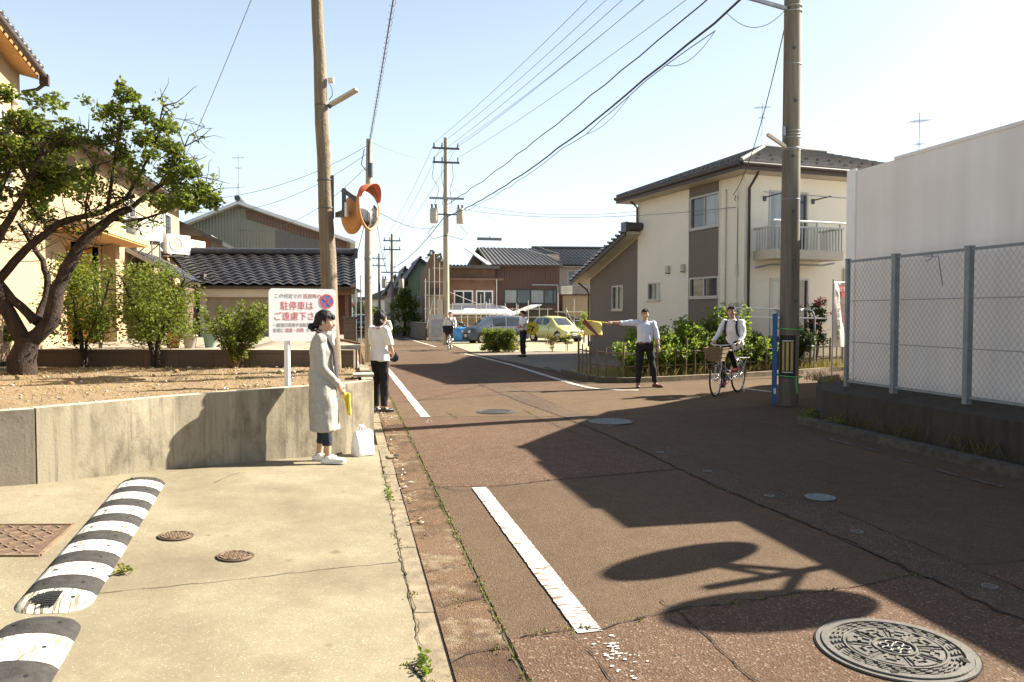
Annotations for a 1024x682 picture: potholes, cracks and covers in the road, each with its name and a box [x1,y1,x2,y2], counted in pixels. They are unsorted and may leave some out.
manhole cover [157,531,194,541]
manhole cover [814,618,983,682]
manhole cover [804,493,836,501]
crack [102,379,1024,682]
manhole cover [216,550,254,562]
